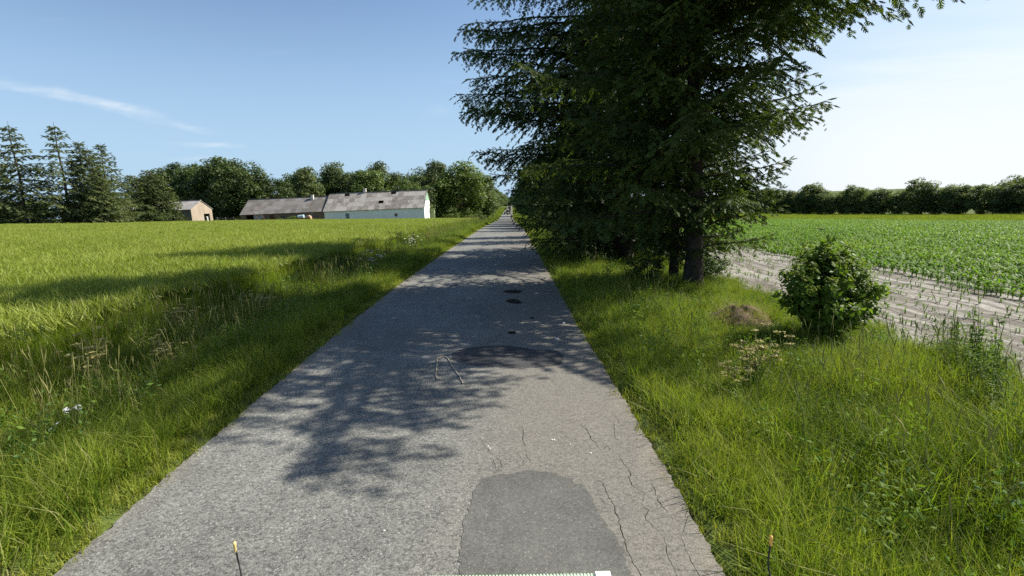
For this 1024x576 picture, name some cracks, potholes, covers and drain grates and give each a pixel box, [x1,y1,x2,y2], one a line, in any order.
crack [581,416,700,576]
